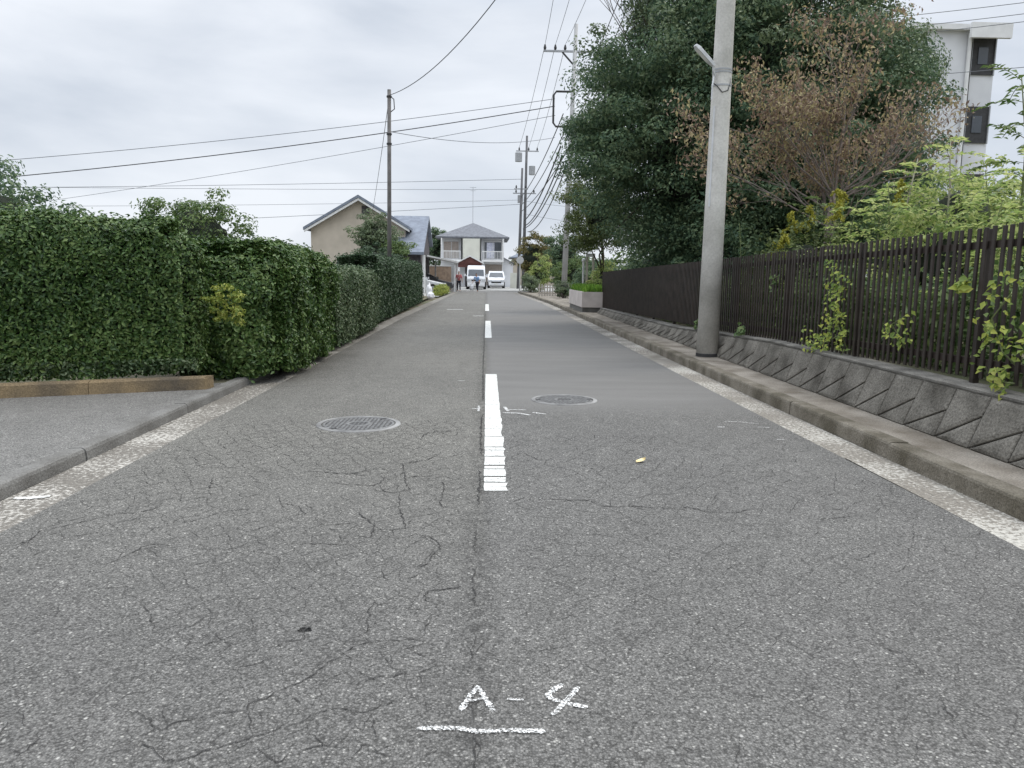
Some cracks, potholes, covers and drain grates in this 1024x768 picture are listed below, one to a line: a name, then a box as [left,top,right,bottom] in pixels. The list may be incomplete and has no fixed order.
crack [0,420,469,768]
manhole cover [316,416,401,433]
manhole cover [531,394,597,406]
crack [503,435,1024,768]
